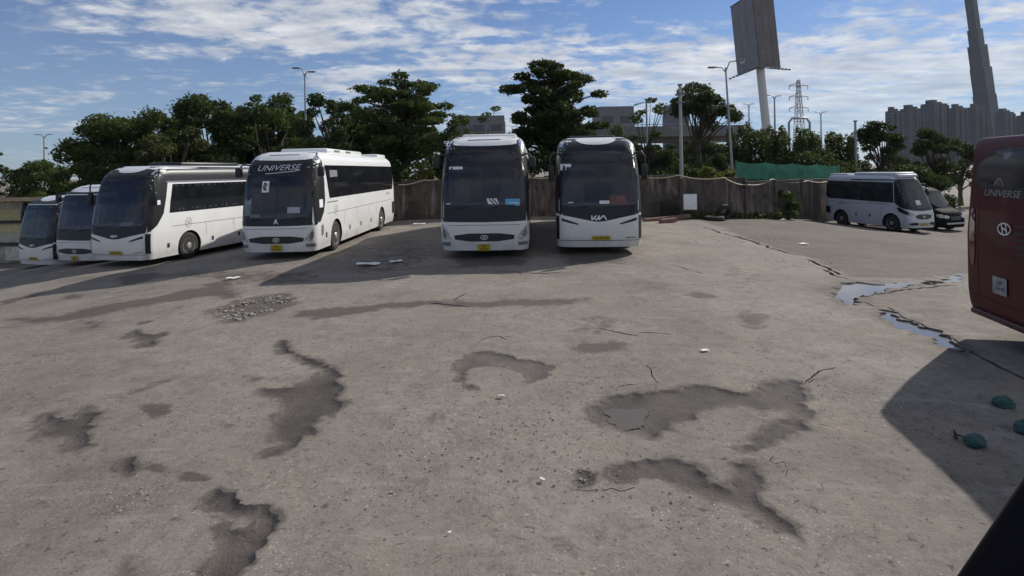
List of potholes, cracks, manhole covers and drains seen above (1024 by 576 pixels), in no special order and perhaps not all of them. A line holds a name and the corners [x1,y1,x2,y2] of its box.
pothole [126,330,166,348]
pothole [572,469,596,488]
pothole [36,407,103,450]
pothole [607,458,803,542]
pothole [210,293,295,322]
pothole [113,456,137,476]
pothole [200,488,281,576]
pothole [258,340,344,459]
crack [805,367,836,383]
pothole [452,351,555,389]
crack [863,284,1024,380]
crack [600,328,674,336]
